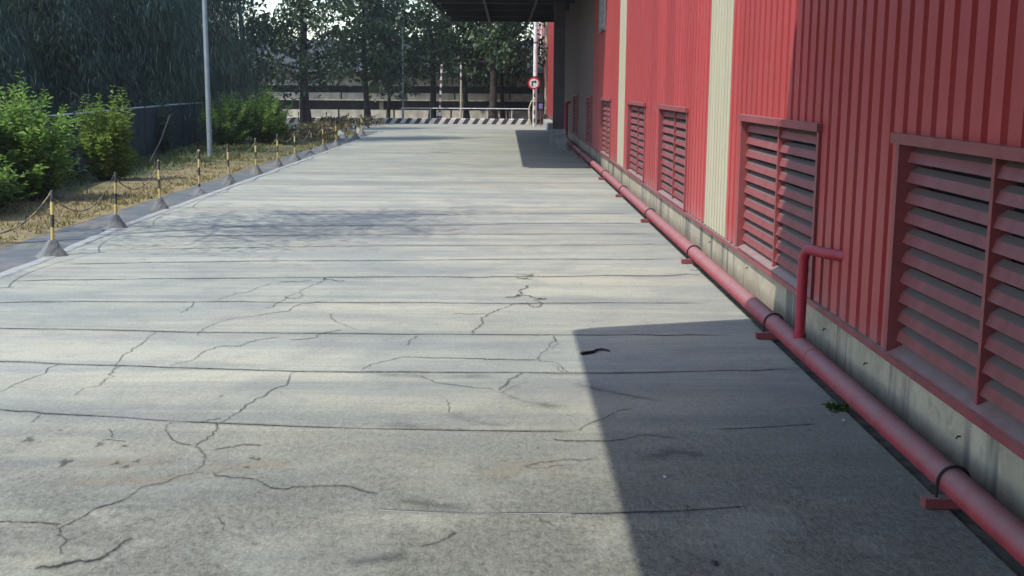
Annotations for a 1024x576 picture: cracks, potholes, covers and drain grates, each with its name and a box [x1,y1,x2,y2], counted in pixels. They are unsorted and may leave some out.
crack [198,278,345,353]
crack [0,377,374,568]
crack [555,408,673,441]
crack [471,274,544,333]
crack [363,337,564,388]
